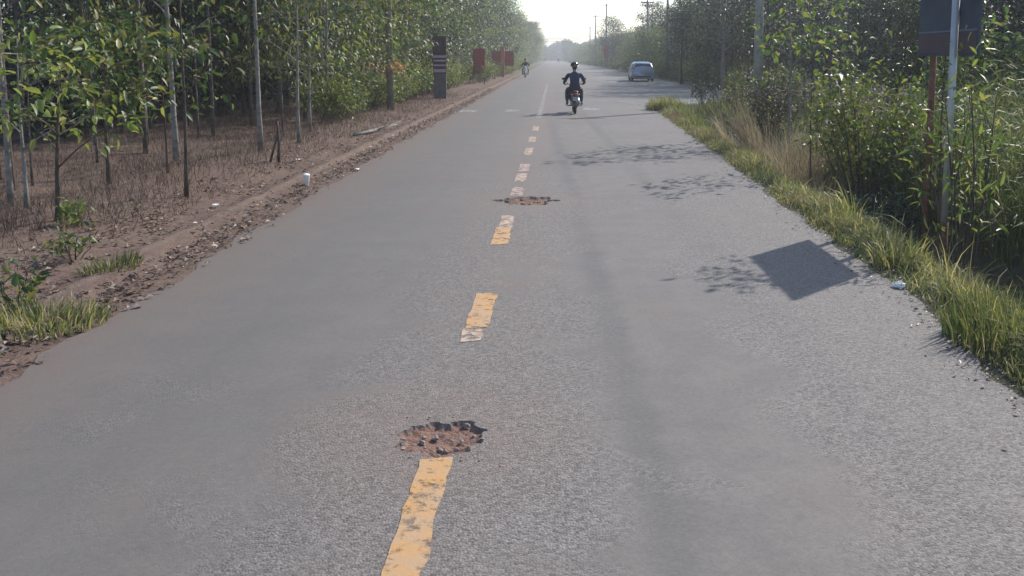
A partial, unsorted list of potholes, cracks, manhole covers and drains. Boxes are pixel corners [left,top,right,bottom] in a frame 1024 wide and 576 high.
pothole [394,416,505,467]
pothole [490,196,561,205]
